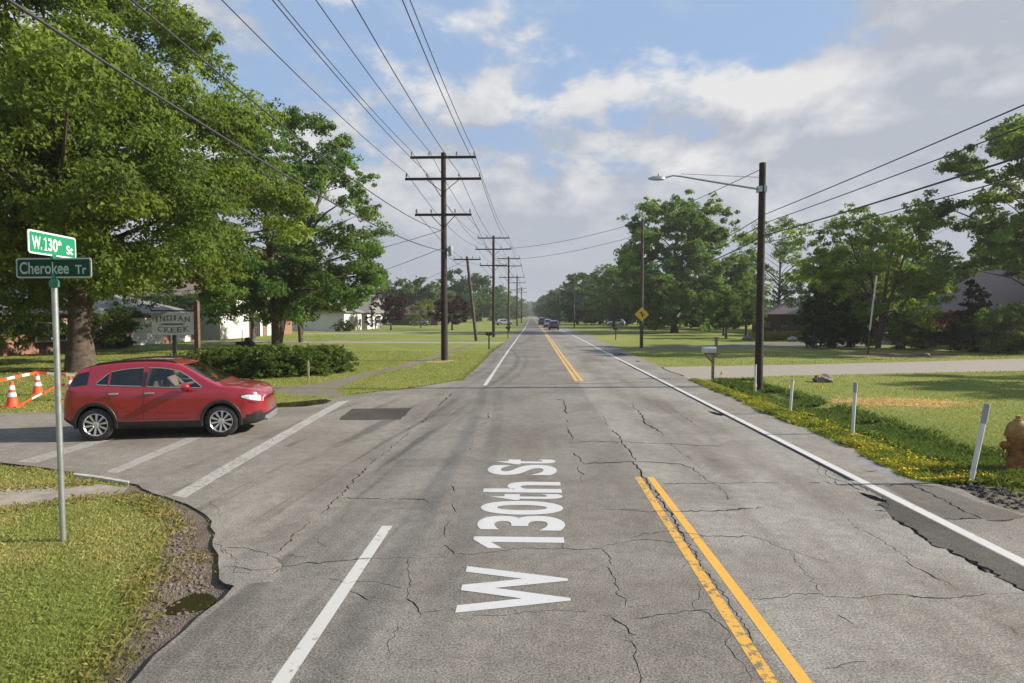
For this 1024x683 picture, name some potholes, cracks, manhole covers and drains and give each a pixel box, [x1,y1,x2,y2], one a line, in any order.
crack [217,382,1022,683]
